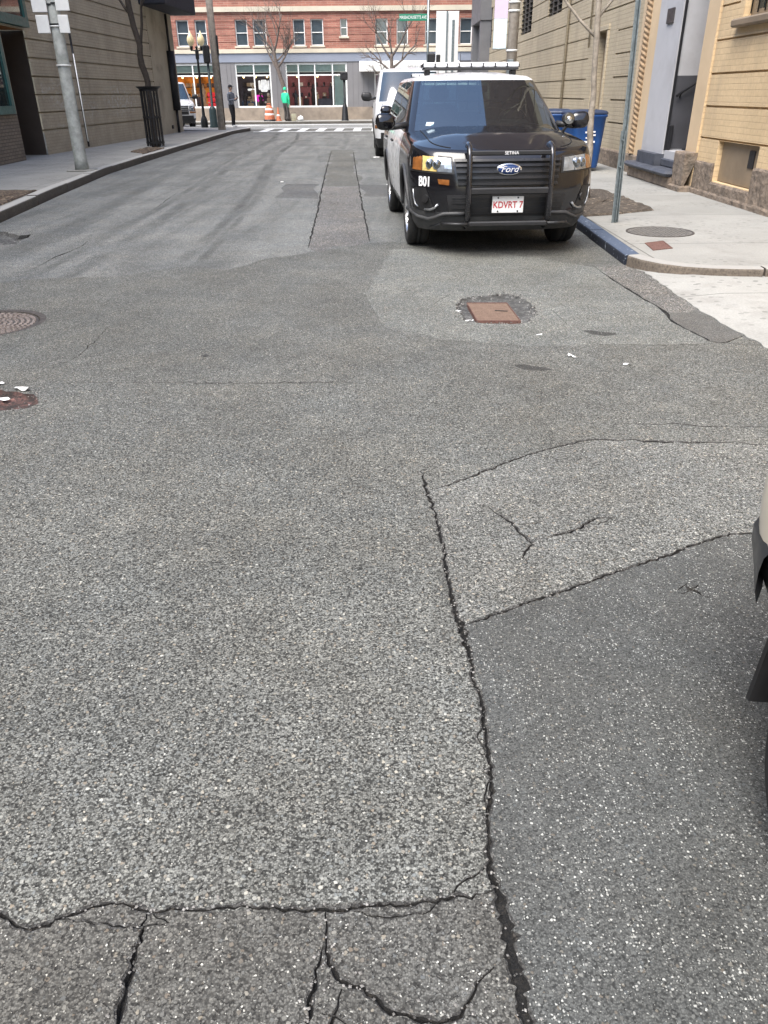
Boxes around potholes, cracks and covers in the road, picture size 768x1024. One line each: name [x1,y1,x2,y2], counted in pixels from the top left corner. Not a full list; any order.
manhole cover [626,226,695,237]
manhole cover [645,241,673,251]
crack [0,423,767,1024]
manhole cover [0,310,47,335]
manhole cover [466,302,521,324]
